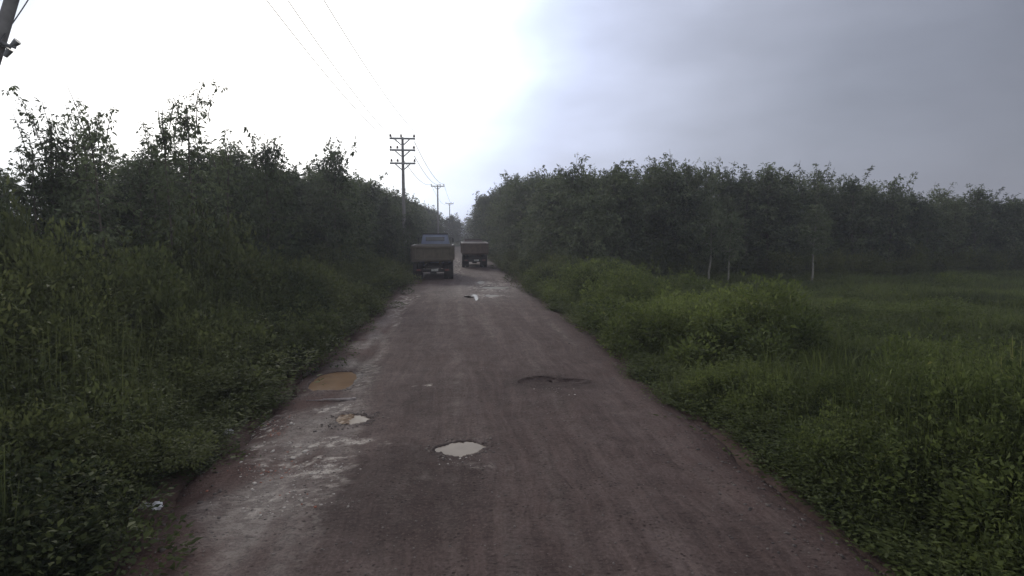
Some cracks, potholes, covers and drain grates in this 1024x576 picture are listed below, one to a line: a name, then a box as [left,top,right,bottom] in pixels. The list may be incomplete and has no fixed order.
pothole [511,375,593,388]
pothole [427,438,493,459]
pothole [330,413,376,427]
pothole [298,370,366,394]
